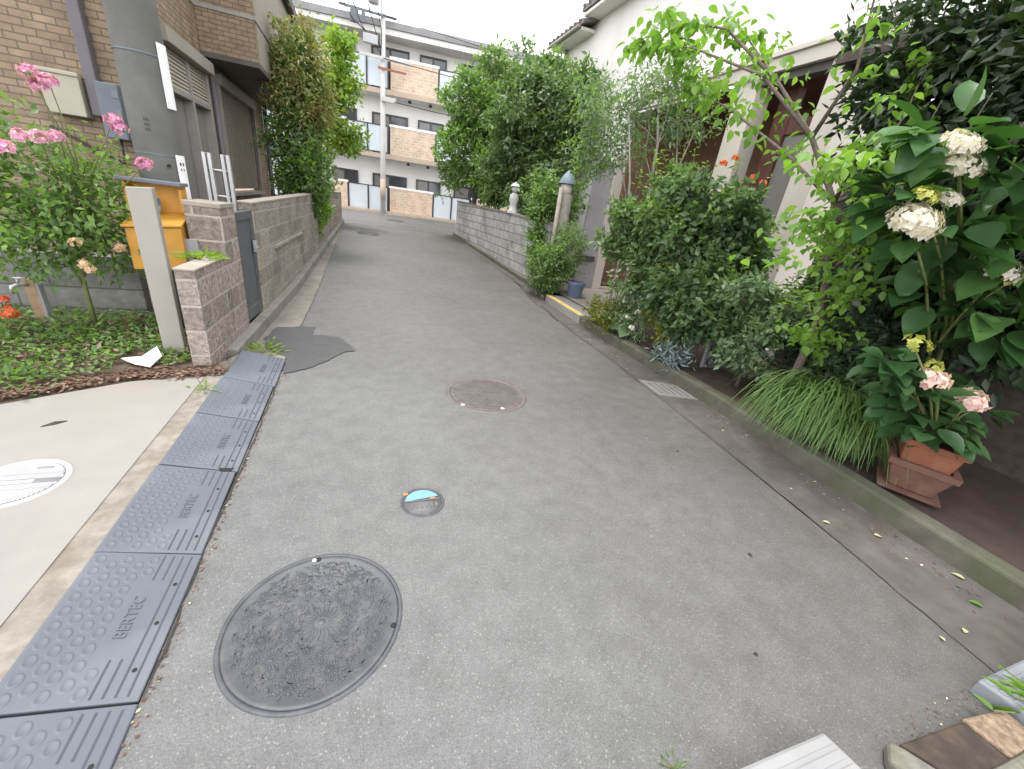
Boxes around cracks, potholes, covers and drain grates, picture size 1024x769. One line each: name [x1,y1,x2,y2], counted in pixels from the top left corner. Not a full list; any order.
utility cover [400,488,444,518]
manhole cover [213,554,403,718]
manhole cover [446,377,526,414]
utility cover [0,459,73,509]
